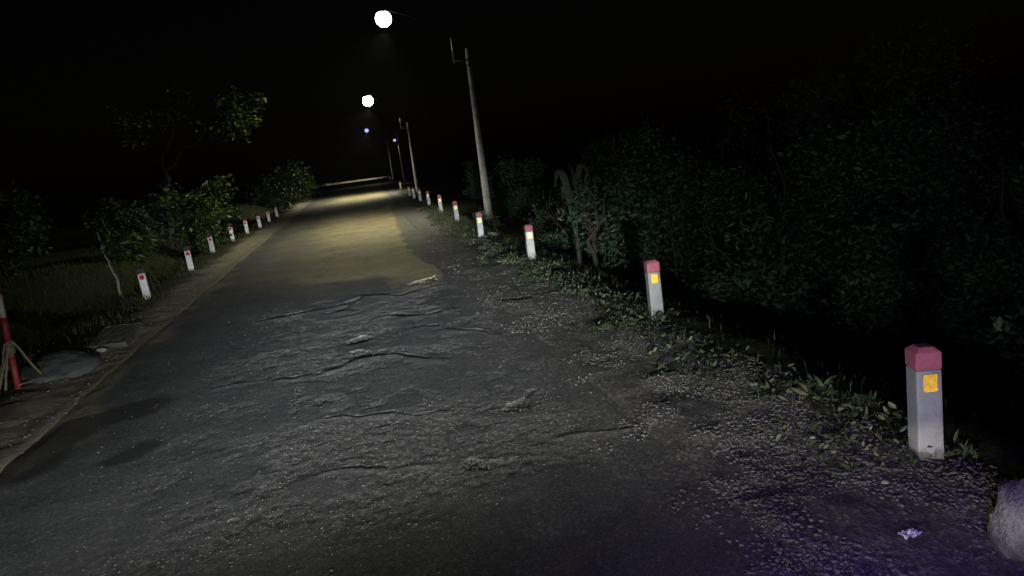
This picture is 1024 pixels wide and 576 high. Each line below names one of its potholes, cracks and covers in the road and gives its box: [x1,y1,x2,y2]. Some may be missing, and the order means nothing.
crack [252,282,496,334]
crack [323,408,455,419]
crack [322,463,424,472]
crack [283,352,436,379]
crack [213,380,250,388]
crack [558,424,642,437]
